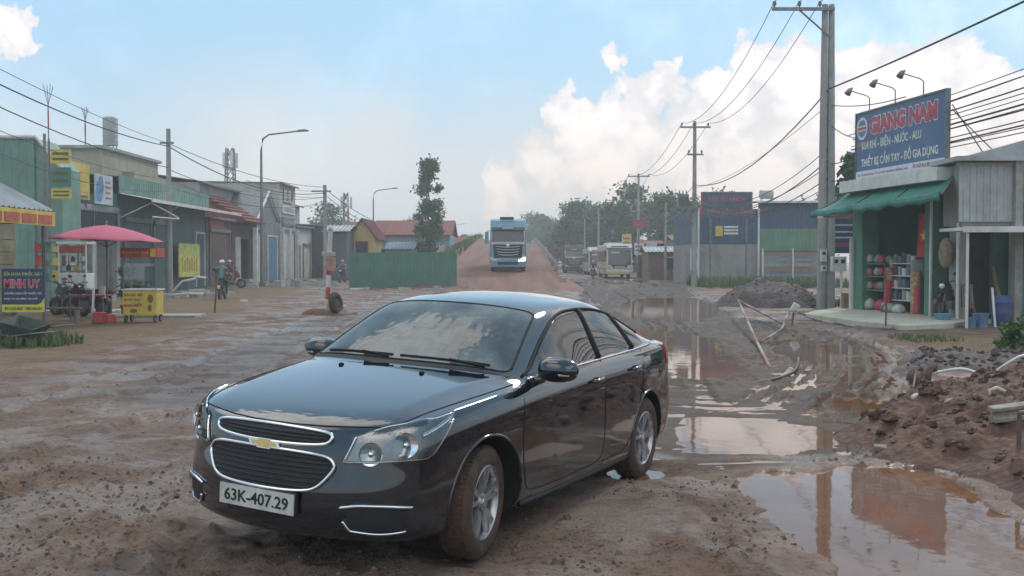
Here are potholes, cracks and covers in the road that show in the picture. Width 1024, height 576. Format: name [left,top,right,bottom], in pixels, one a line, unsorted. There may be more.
pothole [608,297,724,321]
pothole [715,460,1024,576]
pothole [656,412,860,458]
